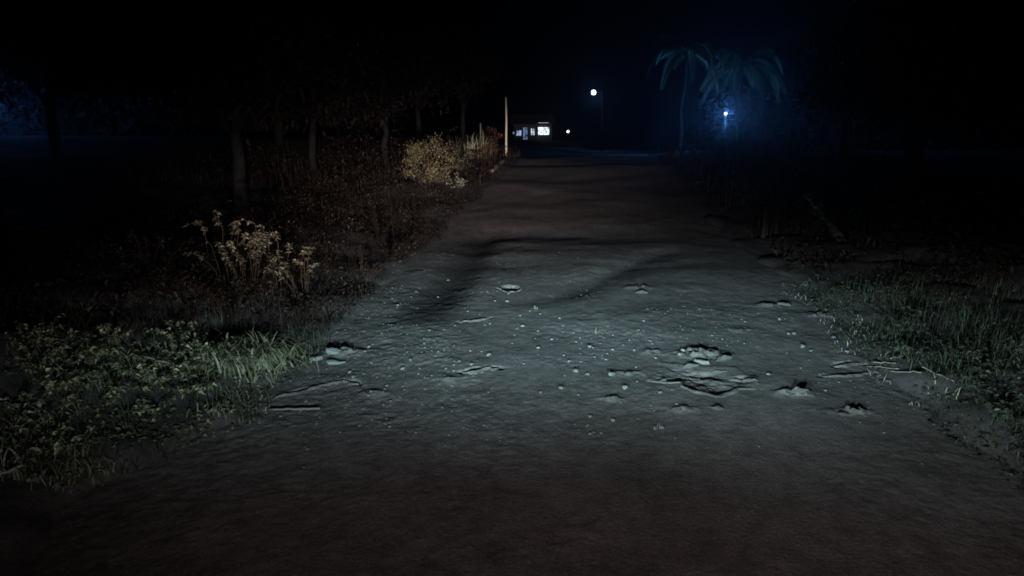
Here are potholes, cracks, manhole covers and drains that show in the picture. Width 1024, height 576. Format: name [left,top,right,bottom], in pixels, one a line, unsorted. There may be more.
crack [264,378,362,402]
crack [821,360,874,378]
pothole [496,284,523,293]
pothole [638,362,759,398]
